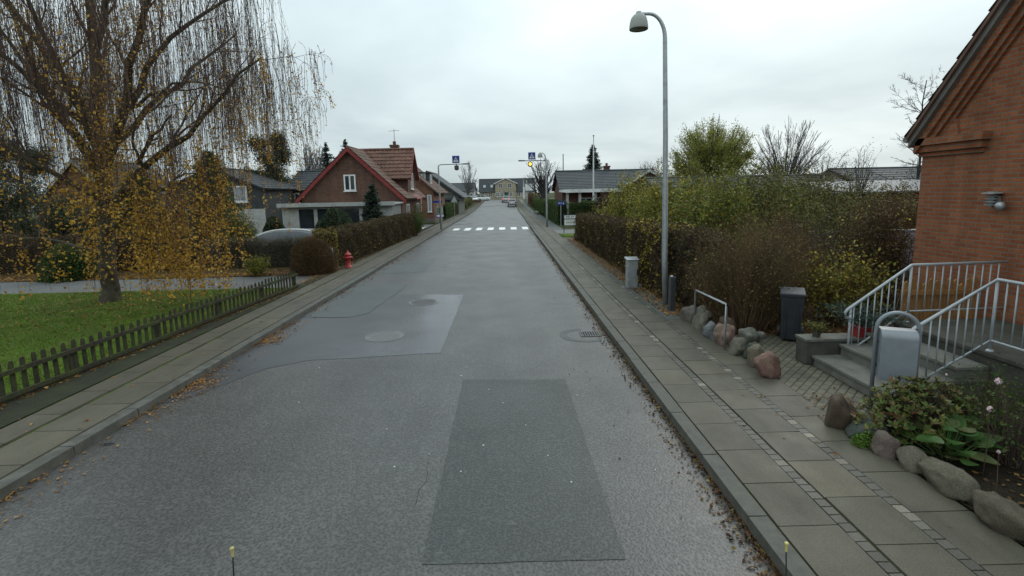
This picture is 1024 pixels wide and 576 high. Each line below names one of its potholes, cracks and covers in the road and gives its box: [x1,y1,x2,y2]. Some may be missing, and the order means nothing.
manhole cover [365,331,404,342]
